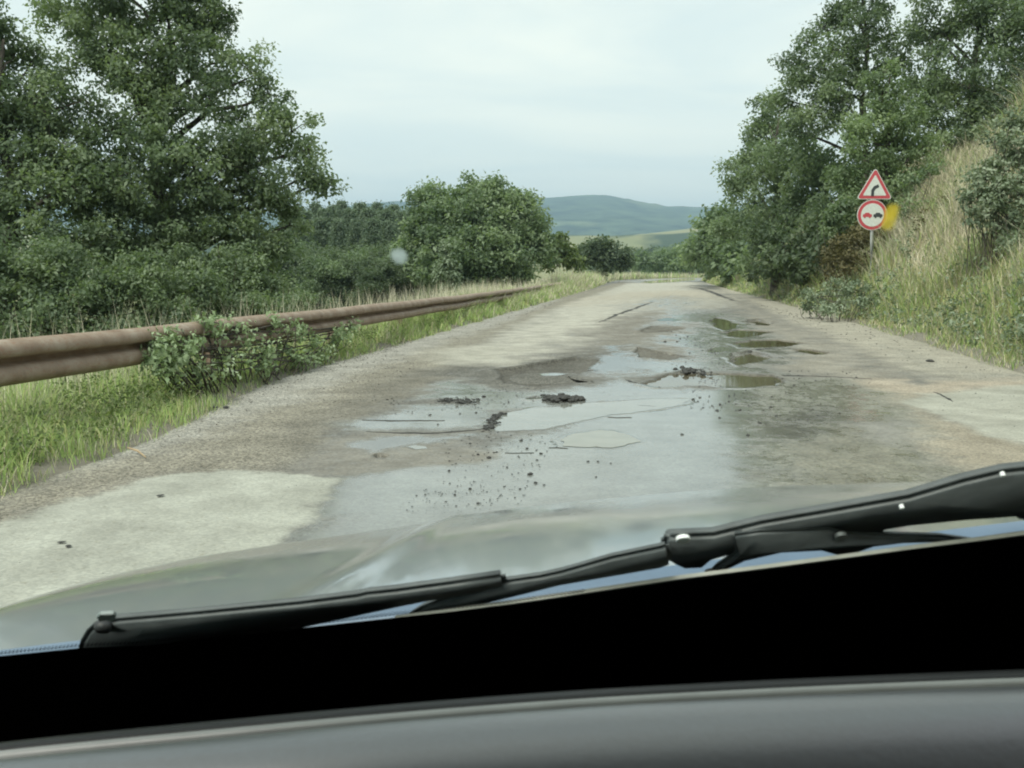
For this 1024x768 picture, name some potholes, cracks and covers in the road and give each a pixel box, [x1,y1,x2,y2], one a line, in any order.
crack [366,414,502,434]
pothole [480,398,695,433]
pothole [632,372,796,390]
pothole [710,329,784,339]
crack [598,302,653,323]
pothole [724,339,815,349]
pothole [625,346,699,362]
pothole [720,349,790,367]
pothole [701,317,756,331]
pothole [485,356,602,389]
